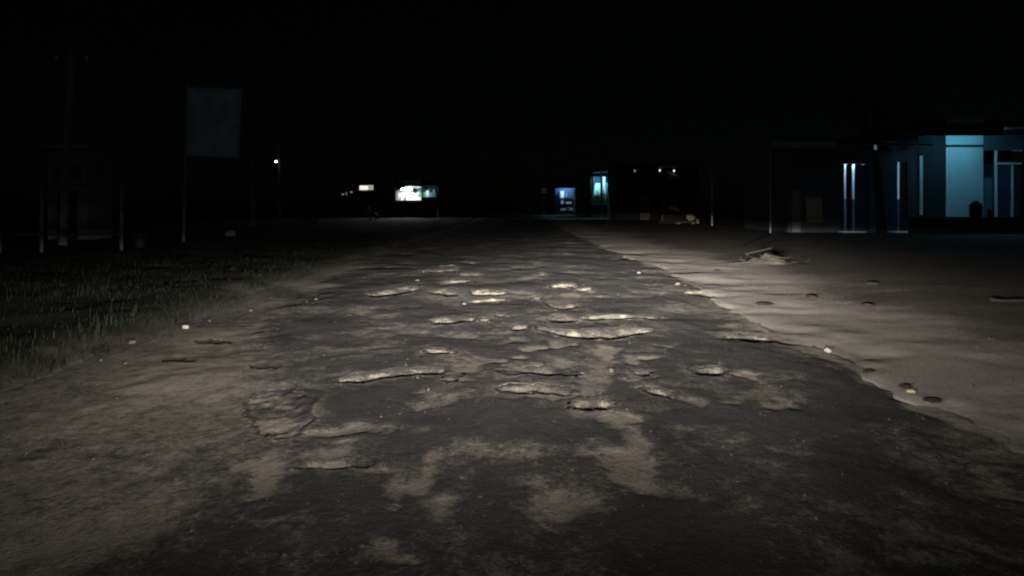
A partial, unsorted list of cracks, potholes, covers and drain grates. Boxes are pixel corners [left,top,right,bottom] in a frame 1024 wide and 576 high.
pothole [241,386,320,442]
pothole [467,289,511,297]
pothole [491,363,587,378]
pothole [334,365,452,384]
pothole [574,313,662,321]
pothole [363,286,421,298]
pothole [534,325,656,341]
pothole [490,381,581,398]
pothole [427,316,478,326]
pothole [564,396,620,413]
pothole [633,384,681,400]
